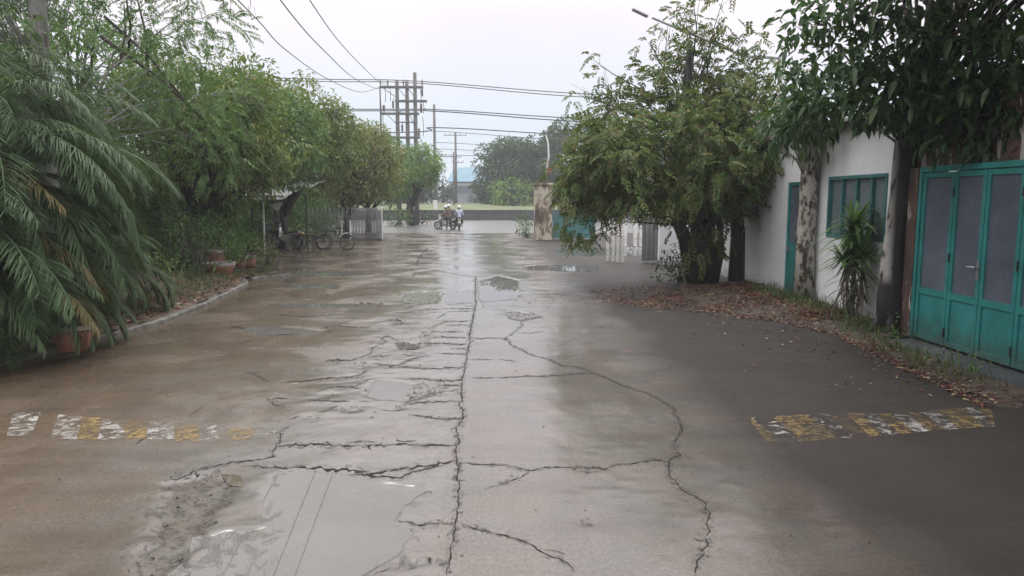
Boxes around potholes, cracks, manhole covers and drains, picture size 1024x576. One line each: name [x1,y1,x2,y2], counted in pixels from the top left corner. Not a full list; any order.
crack [168,295,714,574]
pothole [395,342,421,350]
